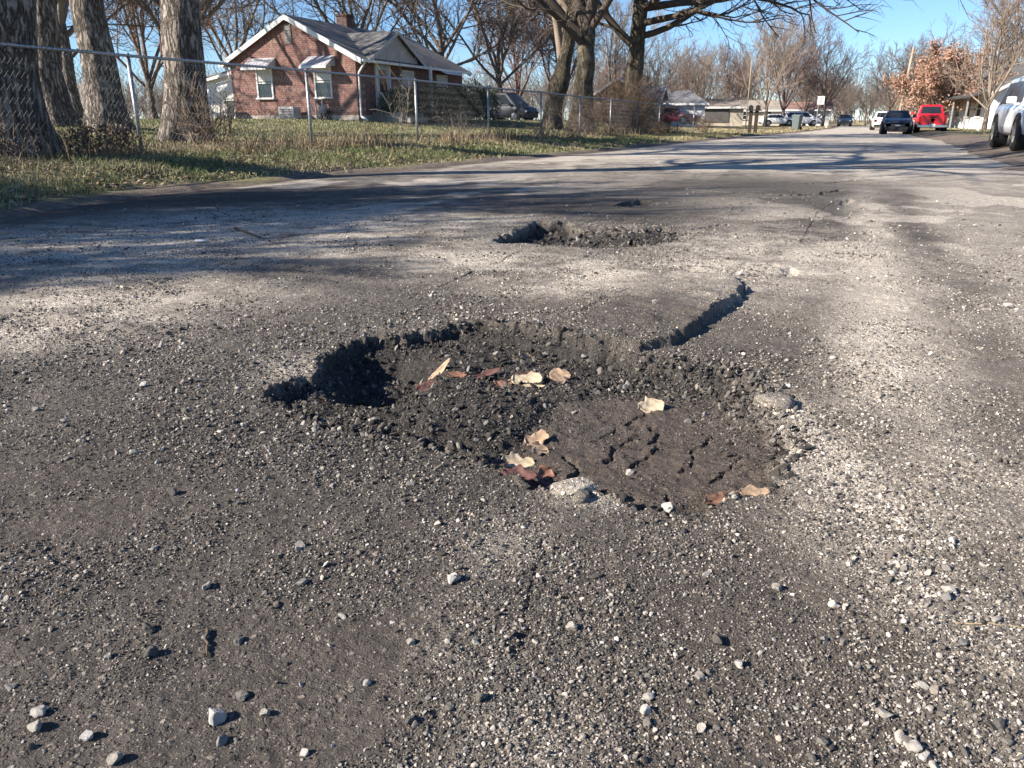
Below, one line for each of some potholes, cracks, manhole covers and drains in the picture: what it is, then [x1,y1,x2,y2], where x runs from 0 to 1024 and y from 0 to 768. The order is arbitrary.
pothole [490,221,701,249]
pothole [243,271,815,522]
